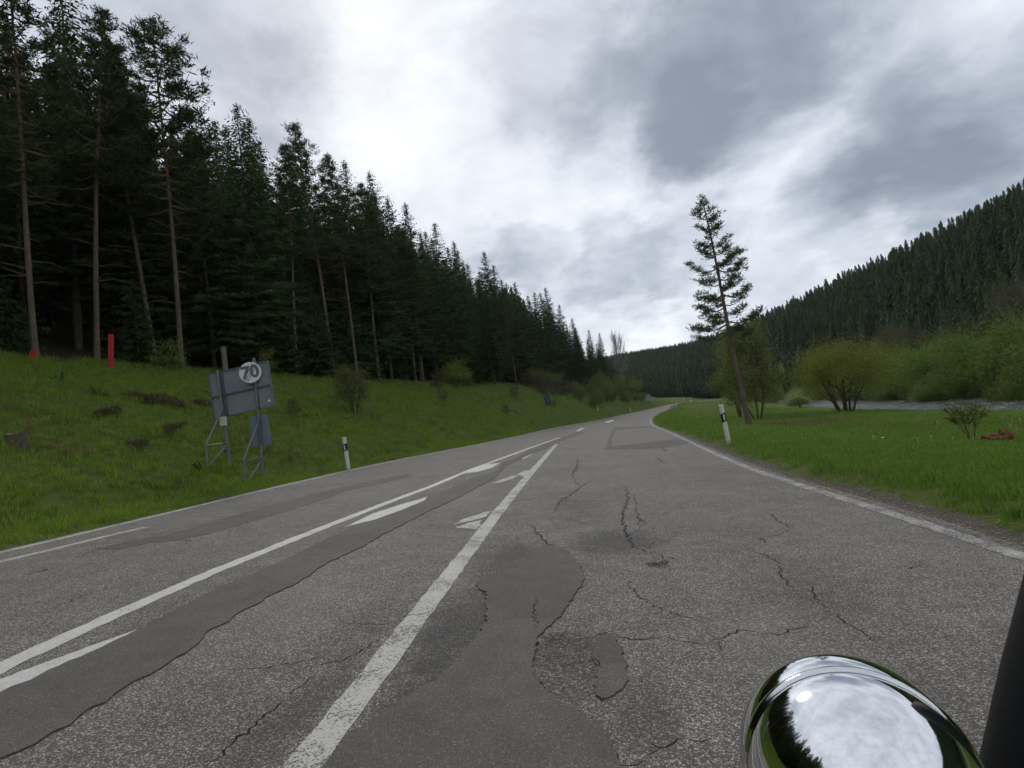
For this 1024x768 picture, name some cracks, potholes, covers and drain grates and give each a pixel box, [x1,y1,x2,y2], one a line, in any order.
crack [528,458,589,554]
crack [594,578,813,652]
pothole [646,560,670,569]
crack [204,612,429,767]
crack [733,511,795,589]
crack [806,585,878,643]
crack [615,485,675,560]
crack [620,737,711,766]
